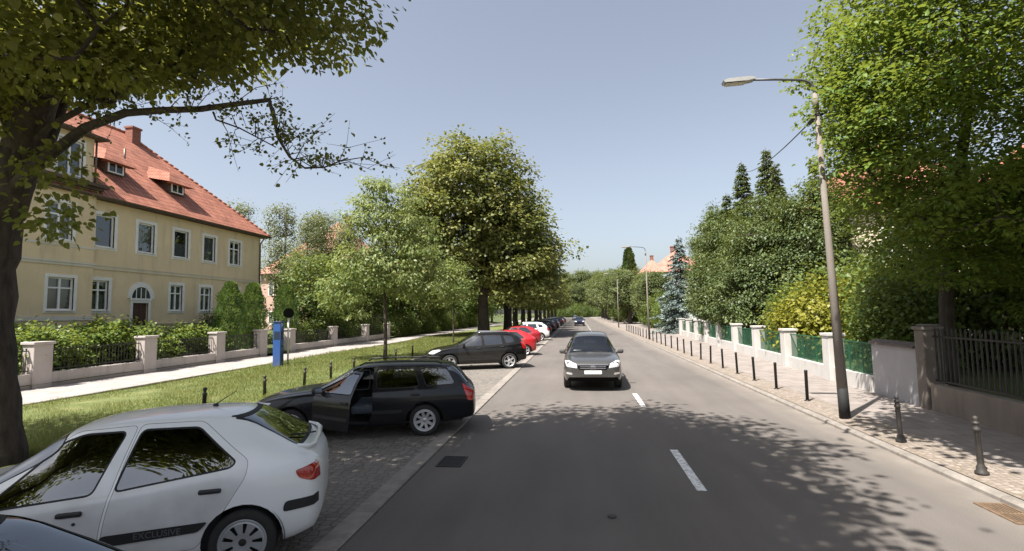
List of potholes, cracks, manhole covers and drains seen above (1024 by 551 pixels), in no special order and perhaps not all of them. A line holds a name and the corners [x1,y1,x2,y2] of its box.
drain grate [435,456,468,467]
drain grate [973,502,1024,525]
